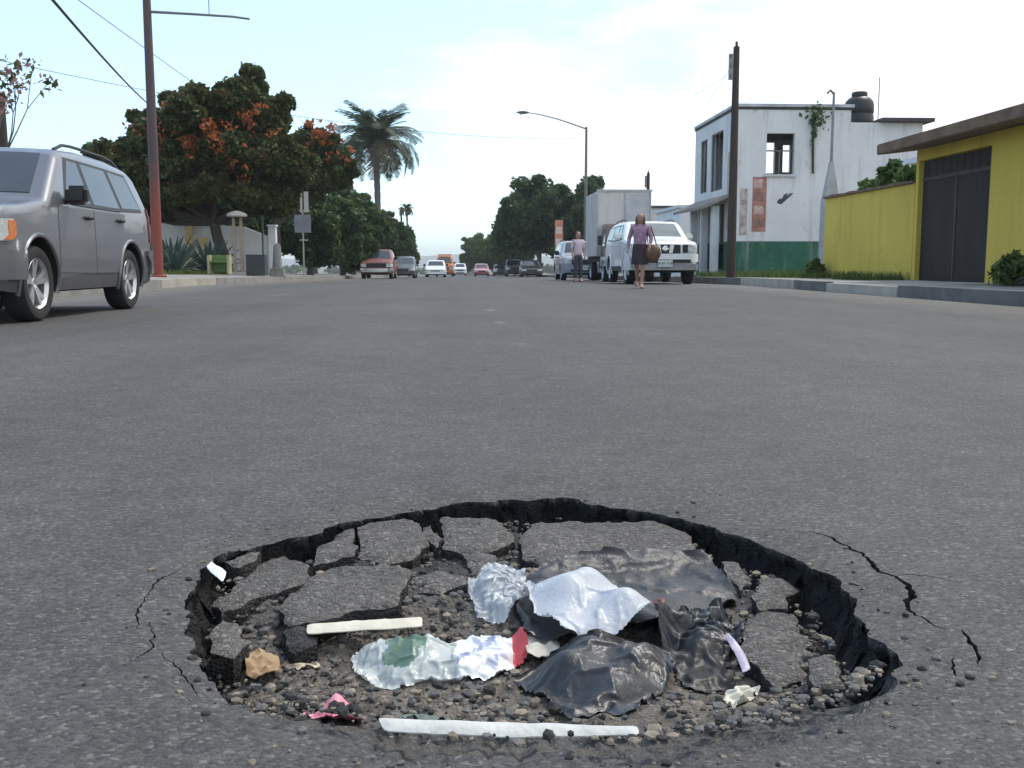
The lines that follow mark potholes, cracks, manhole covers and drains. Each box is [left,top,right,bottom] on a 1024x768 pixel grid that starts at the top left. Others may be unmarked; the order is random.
pothole [184,497,903,768]
crack [135,571,197,695]
crack [780,529,981,677]
